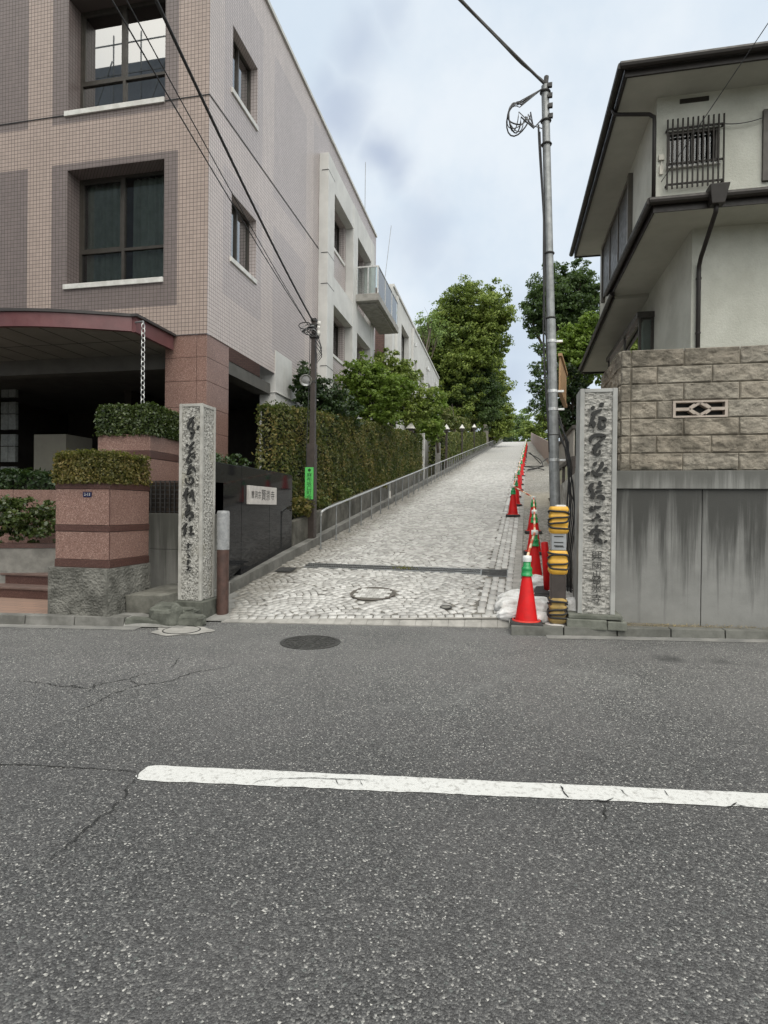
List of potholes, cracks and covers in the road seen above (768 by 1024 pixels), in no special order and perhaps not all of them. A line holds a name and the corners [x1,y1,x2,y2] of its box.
crack [15,660,235,709]
manhole cover [151,626,215,636]
manhole cover [350,587,395,600]
crack [593,790,624,821]
drain grate [480,569,508,577]
manhole cover [280,635,341,650]
drain grate [303,563,481,574]
crack [52,773,139,857]
